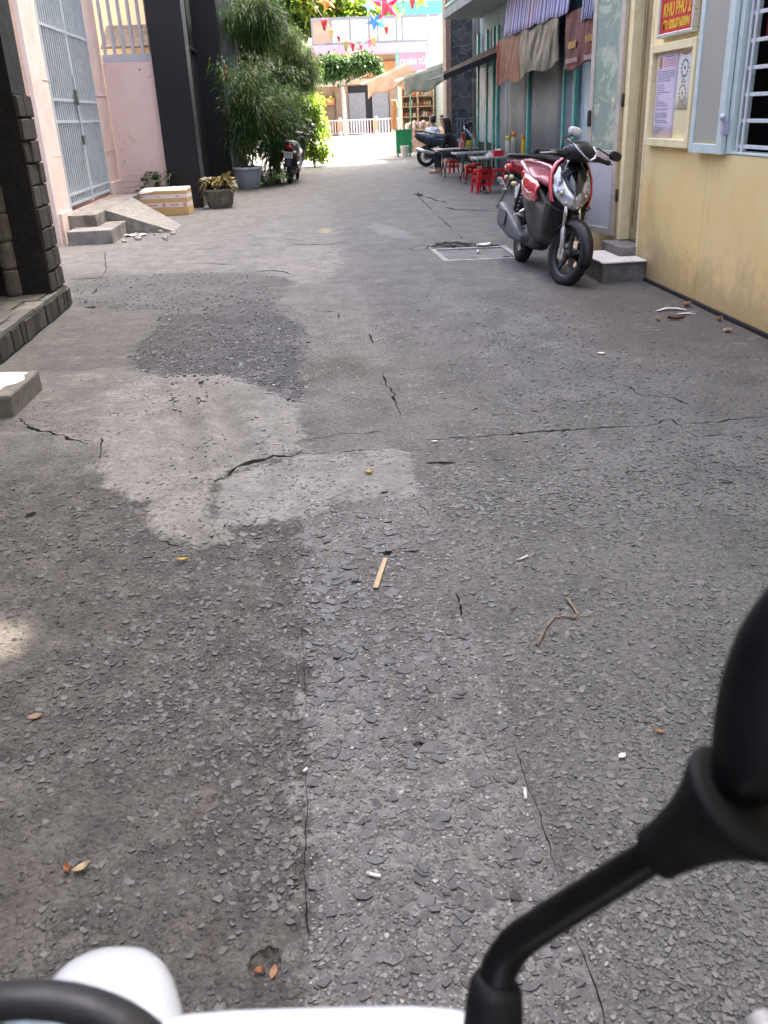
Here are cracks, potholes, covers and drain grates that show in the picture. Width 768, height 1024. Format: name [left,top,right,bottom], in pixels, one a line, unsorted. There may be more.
crack [455,594,606,1024]
crack [369,334,401,417]
crack [422,386,768,457]
manhole cover [430,246,515,261]
pothole [247,945,281,982]
crack [15,419,104,461]
crack [414,192,497,239]
crack [202,431,389,483]
